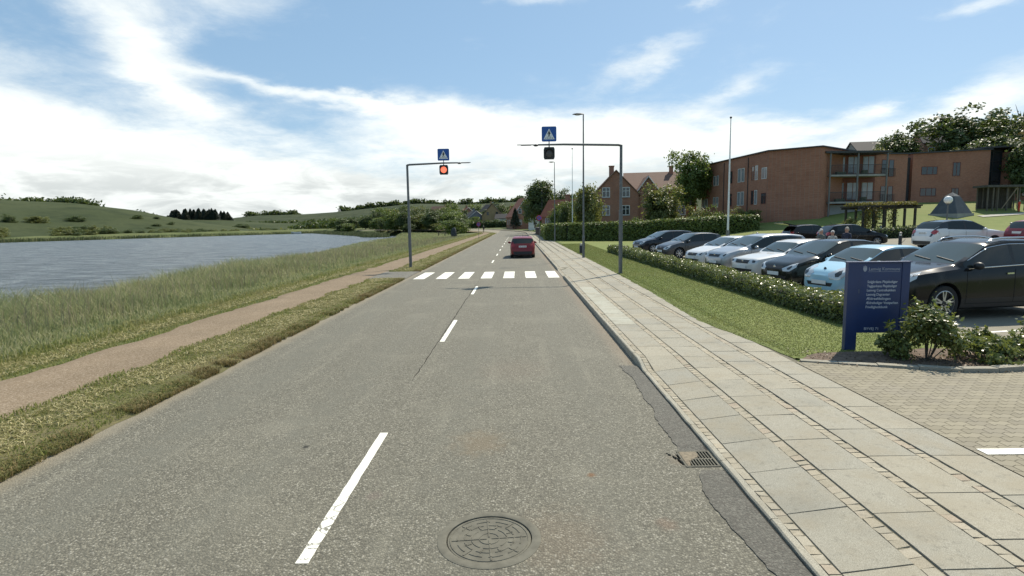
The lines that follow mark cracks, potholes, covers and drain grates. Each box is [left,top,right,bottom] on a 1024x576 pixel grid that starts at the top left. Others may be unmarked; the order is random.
drain grate [676,451,721,467]
manhole cover [437,512,541,570]
crack [411,288,474,383]
